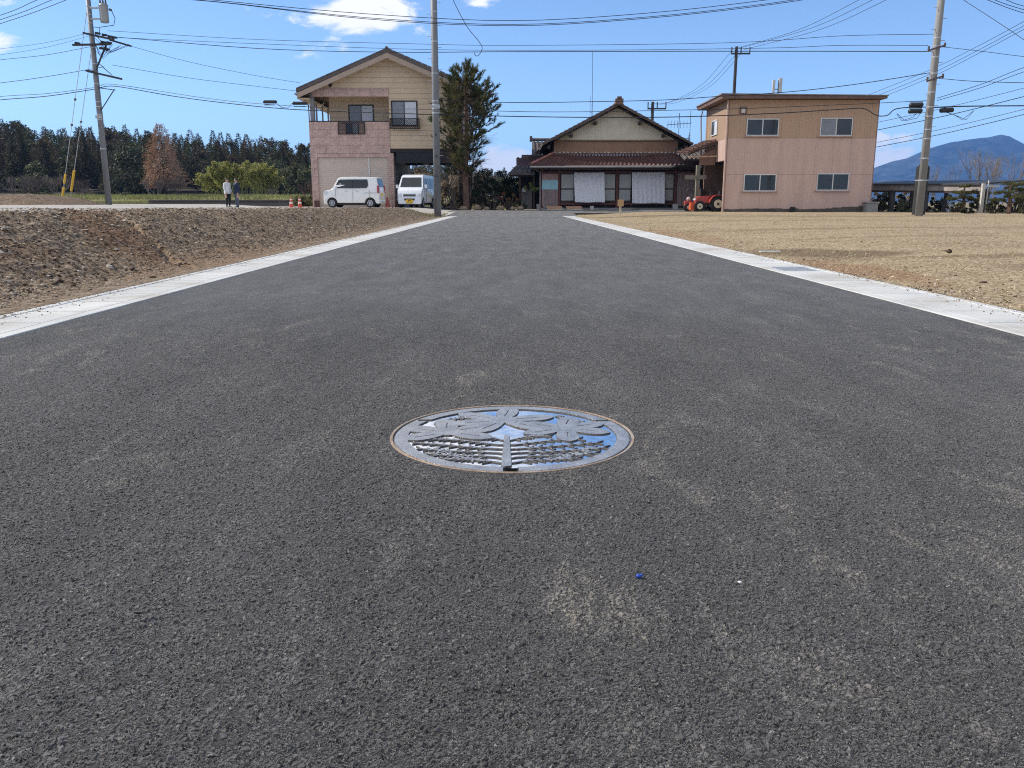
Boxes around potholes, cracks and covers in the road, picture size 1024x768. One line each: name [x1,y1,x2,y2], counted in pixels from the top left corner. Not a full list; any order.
manhole cover [390,405,635,473]
